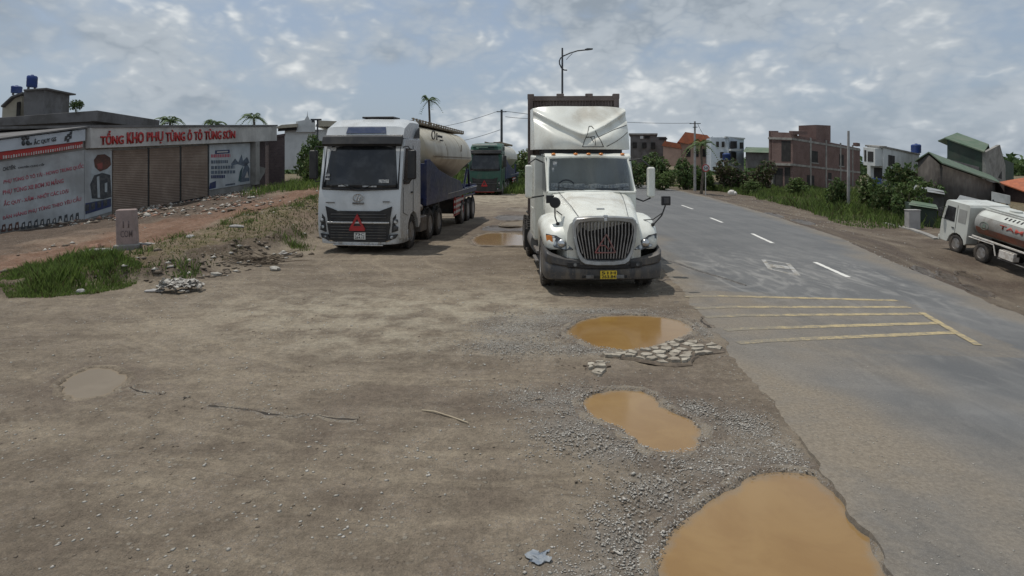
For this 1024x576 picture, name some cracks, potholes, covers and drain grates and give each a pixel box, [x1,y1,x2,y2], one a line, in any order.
pothole [559,313,700,352]
pothole [571,385,714,459]
pothole [468,232,523,247]
pothole [49,365,137,402]
pothole [637,464,891,576]
crack [125,385,359,423]
